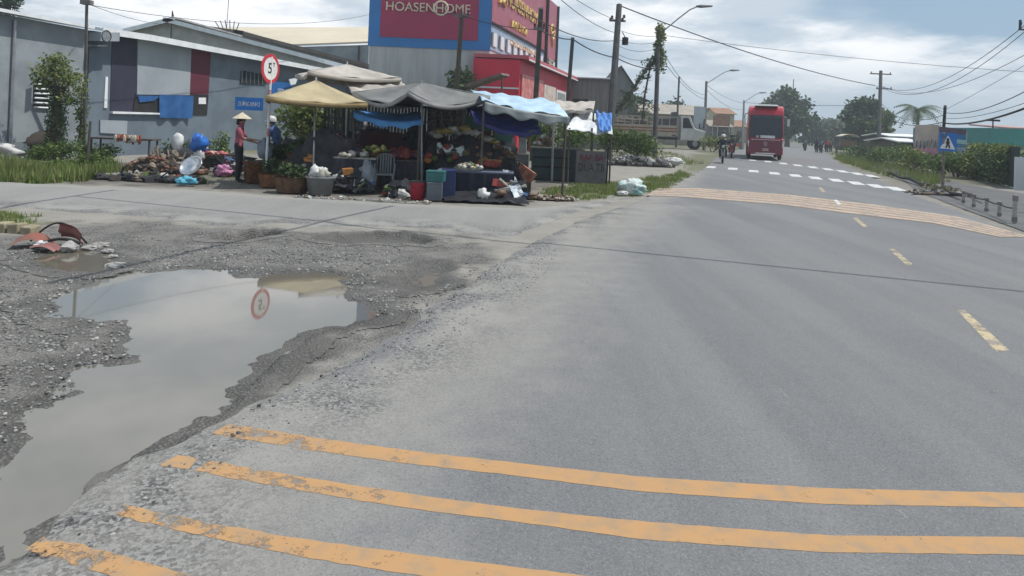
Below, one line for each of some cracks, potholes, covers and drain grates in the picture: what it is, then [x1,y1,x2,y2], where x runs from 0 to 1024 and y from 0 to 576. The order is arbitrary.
pothole [0,243,151,279]
pothole [0,260,412,571]
